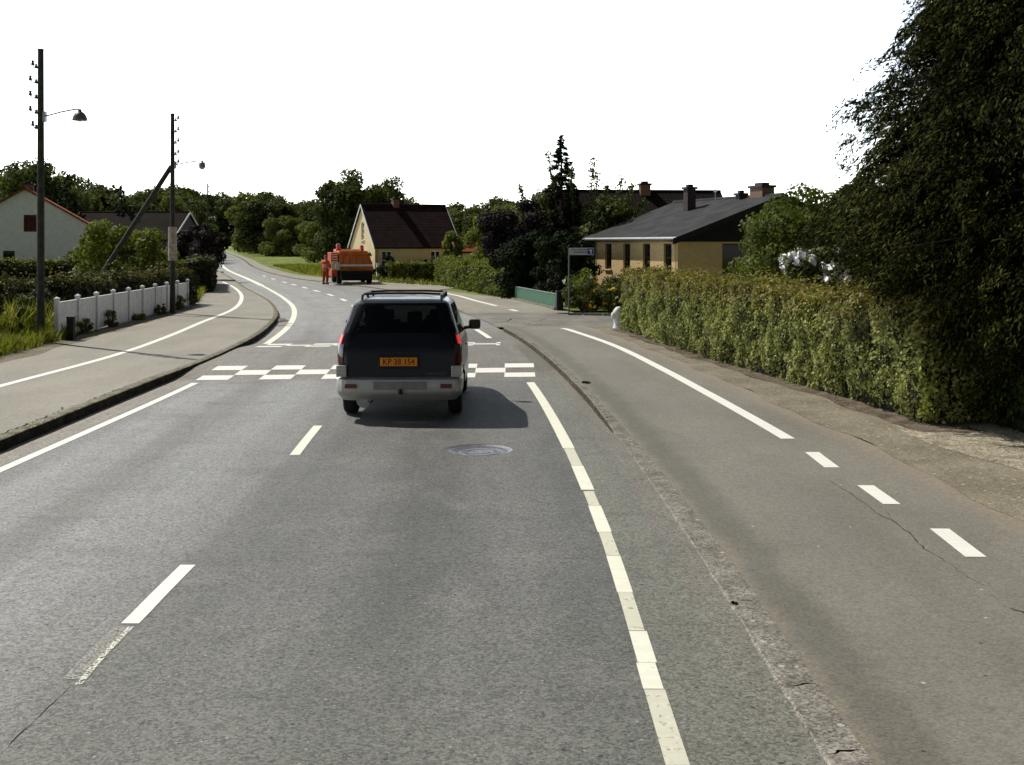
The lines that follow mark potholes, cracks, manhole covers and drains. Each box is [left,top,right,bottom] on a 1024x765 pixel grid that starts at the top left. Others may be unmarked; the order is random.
manhole cover [447,444,513,455]
crack [0,687,70,754]
crack [827,479,1024,613]
